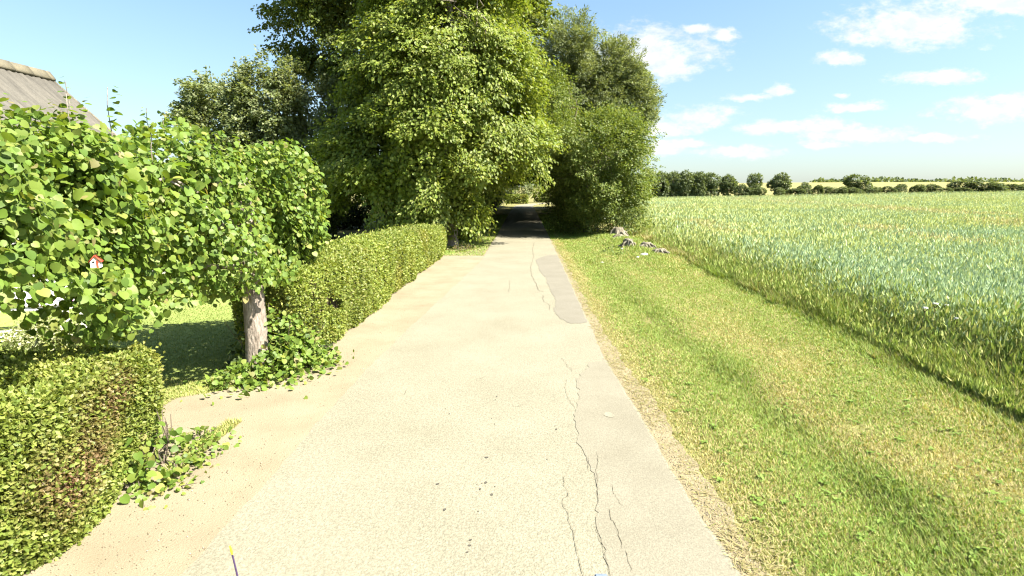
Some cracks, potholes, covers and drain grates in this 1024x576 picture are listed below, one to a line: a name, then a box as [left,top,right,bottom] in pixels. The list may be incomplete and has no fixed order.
crack [563,480,584,575]
crack [588,455,632,573]
